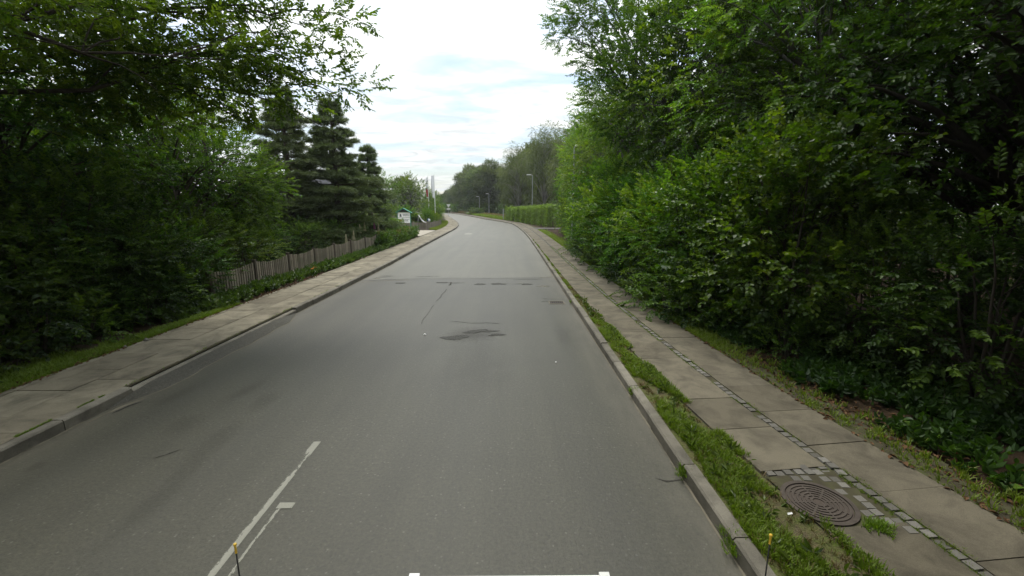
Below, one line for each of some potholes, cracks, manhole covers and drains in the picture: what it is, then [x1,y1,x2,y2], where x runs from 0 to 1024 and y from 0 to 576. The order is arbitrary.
manhole cover [764,465,919,534]
